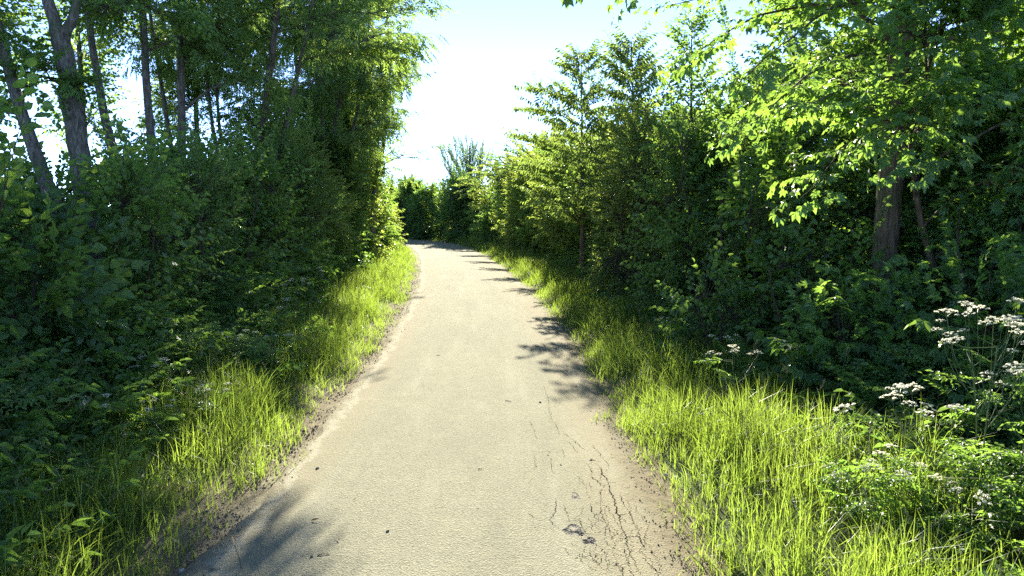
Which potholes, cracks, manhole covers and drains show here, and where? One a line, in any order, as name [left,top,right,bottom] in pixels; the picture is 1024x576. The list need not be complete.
pothole [562,524,586,538]
crack [528,388,660,576]
